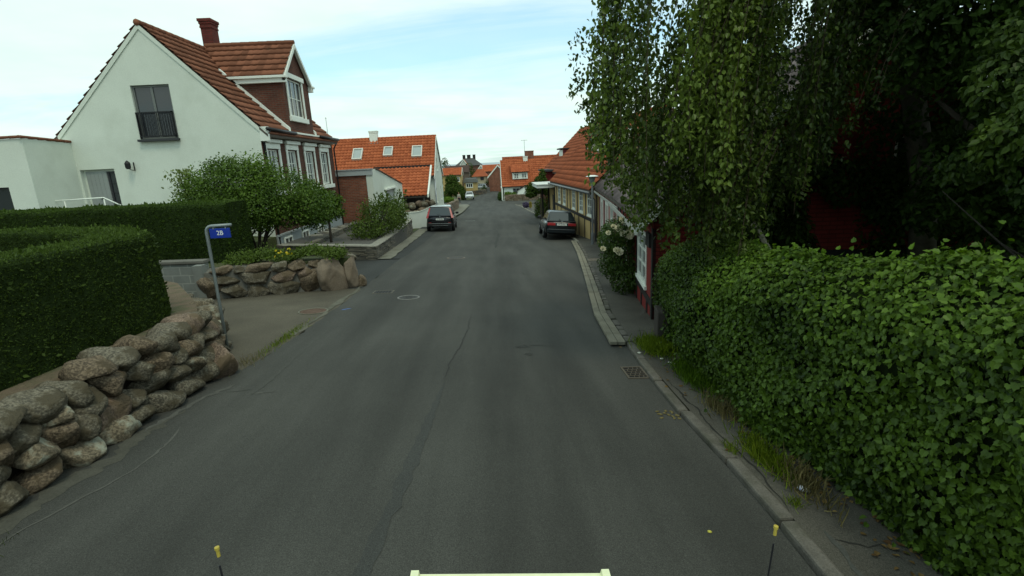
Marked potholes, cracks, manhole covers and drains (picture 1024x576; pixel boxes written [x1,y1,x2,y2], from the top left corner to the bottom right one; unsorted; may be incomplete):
drain grate [620,366,650,379]
crack [445,320,470,377]
crack [0,426,181,545]
